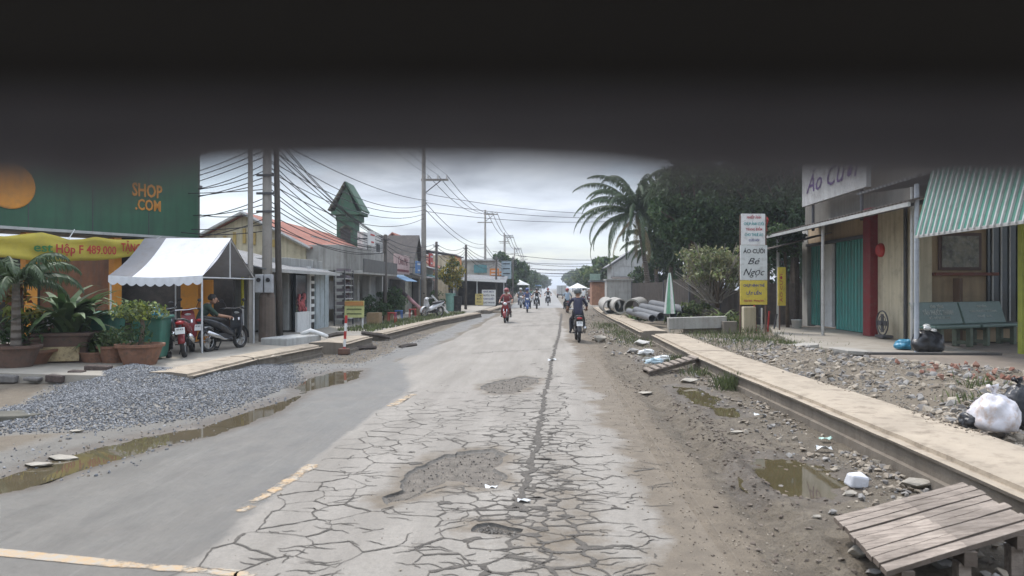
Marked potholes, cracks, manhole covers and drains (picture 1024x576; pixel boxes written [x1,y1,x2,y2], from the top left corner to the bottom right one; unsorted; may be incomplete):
pothole [471,522,523,536]
crack [169,314,673,576]
pothole [382,448,508,505]
pothole [480,376,541,395]
